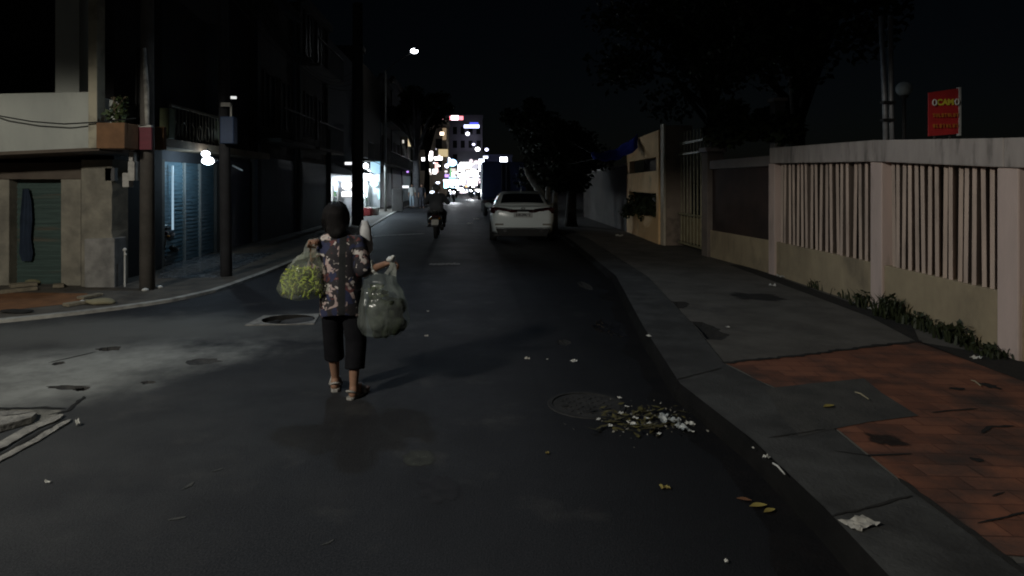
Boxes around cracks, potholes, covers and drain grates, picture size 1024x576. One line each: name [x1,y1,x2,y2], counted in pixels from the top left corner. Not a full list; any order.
crack [0,396,85,456]
manhole cover [245,313,320,326]
crack [978,492,1024,523]
manhole cover [547,391,626,419]
